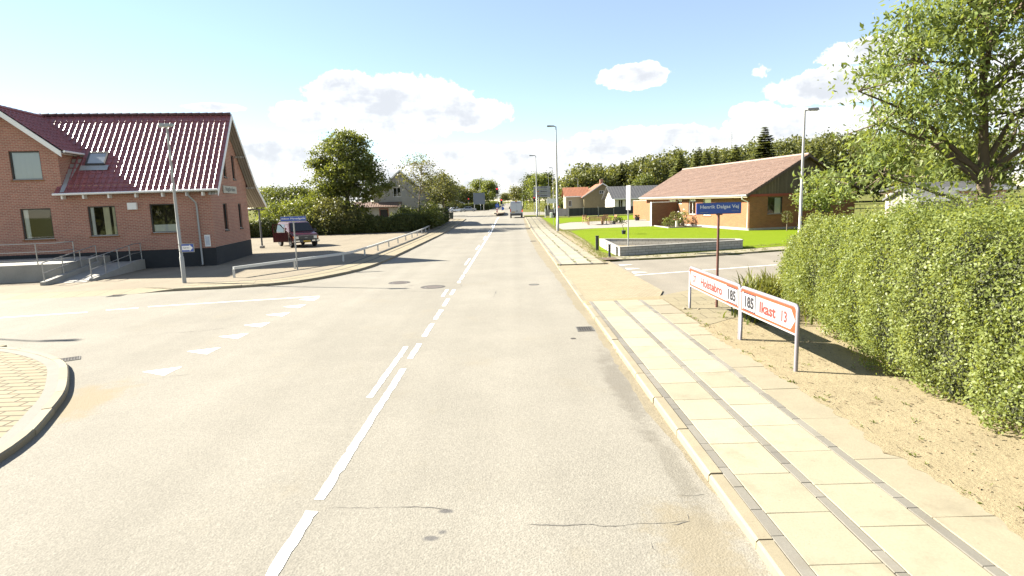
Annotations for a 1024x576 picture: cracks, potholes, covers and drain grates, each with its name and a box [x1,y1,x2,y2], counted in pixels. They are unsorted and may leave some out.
crack [529,493,707,526]
